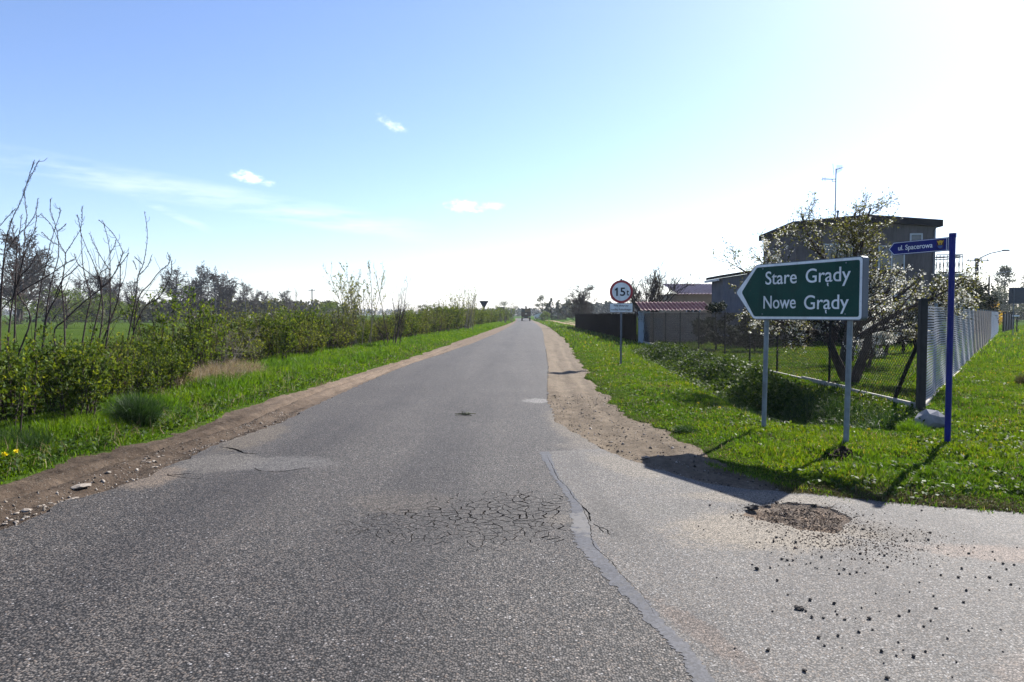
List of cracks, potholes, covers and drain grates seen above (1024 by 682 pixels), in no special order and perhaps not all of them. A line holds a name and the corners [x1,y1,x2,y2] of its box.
crack [336,458,645,598]
pothole [742,502,852,534]
